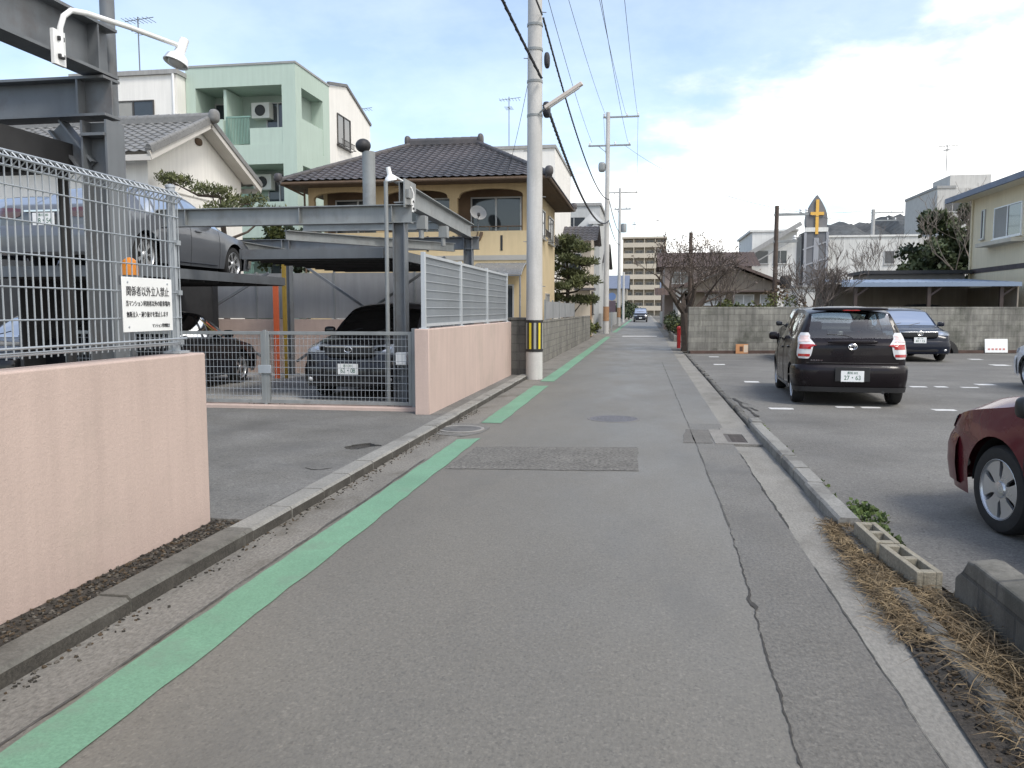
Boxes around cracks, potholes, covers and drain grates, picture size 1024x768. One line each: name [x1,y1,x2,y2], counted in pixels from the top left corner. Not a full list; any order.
drain grate [708,428,763,447]
crack [663,365,803,768]
manhole cover [436,423,490,436]
